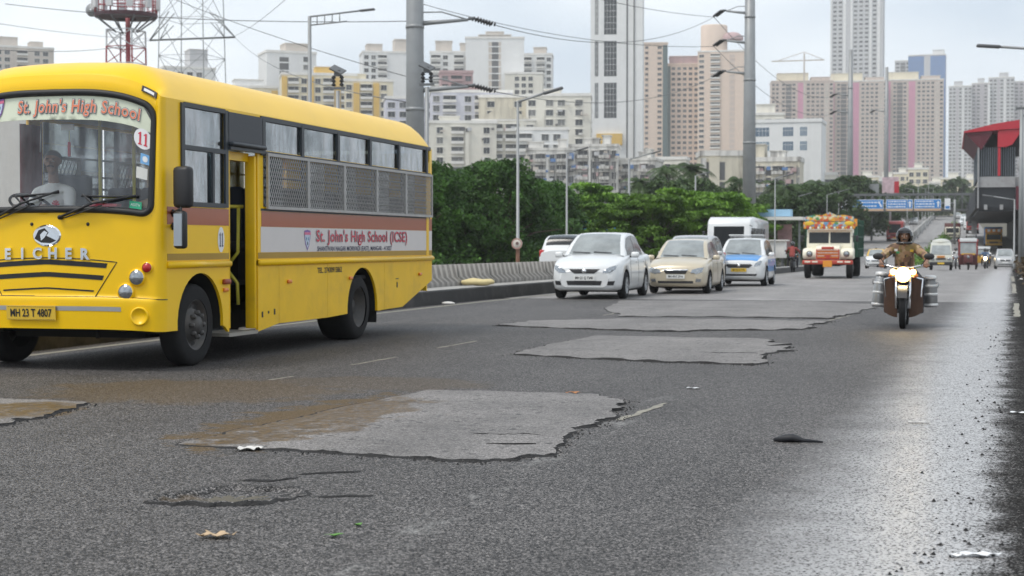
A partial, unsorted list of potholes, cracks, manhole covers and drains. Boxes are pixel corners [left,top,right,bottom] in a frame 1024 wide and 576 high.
crack [244,470,363,482]
pothole [143,484,312,507]
